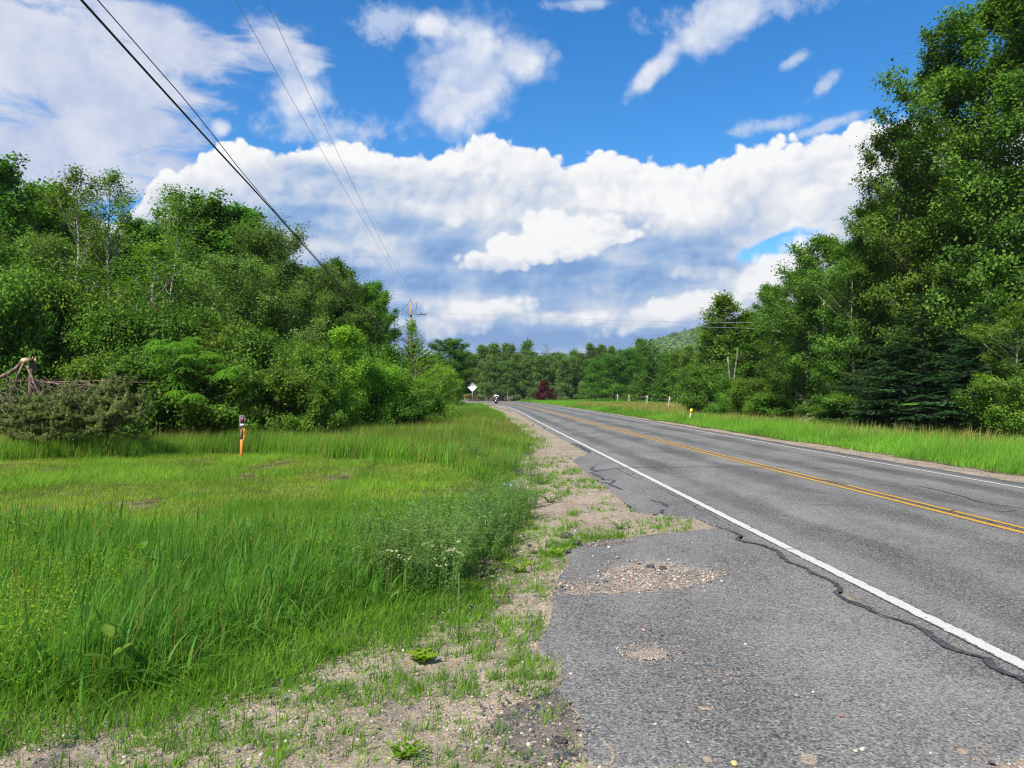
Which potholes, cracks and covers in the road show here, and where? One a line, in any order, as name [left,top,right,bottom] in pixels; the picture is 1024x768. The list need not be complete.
pothole [551,558,733,597]
pothole [612,642,689,664]
